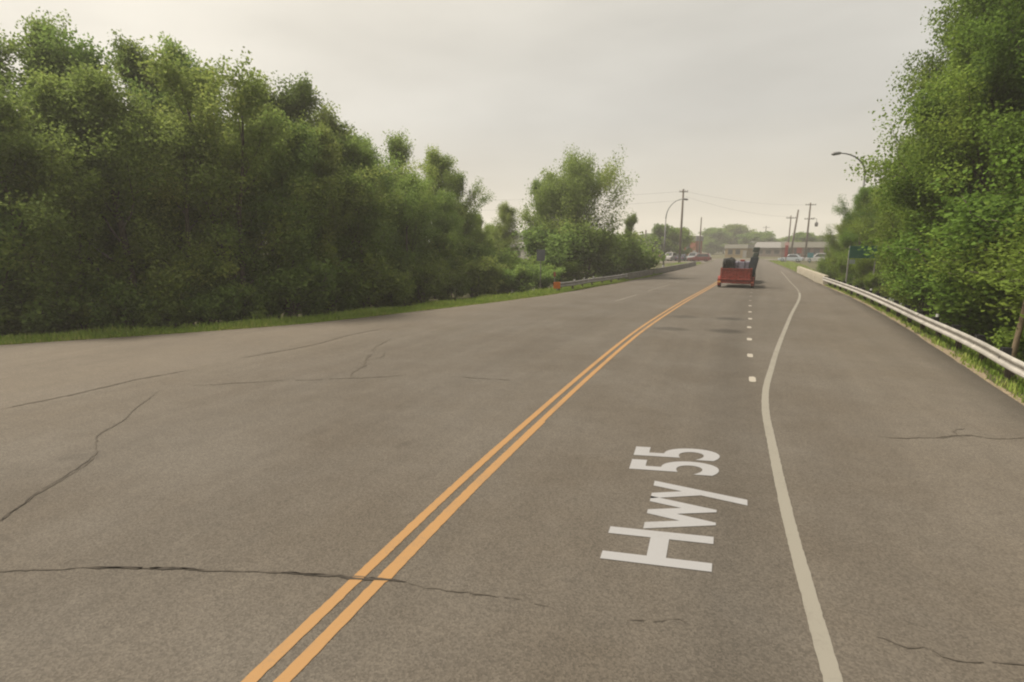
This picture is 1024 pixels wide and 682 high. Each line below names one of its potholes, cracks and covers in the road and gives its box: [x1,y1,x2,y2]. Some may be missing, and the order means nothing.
crack [0,566,553,608]
crack [0,370,186,520]
crack [208,327,401,385]
crack [877,636,1024,665]
crack [878,428,1024,439]
